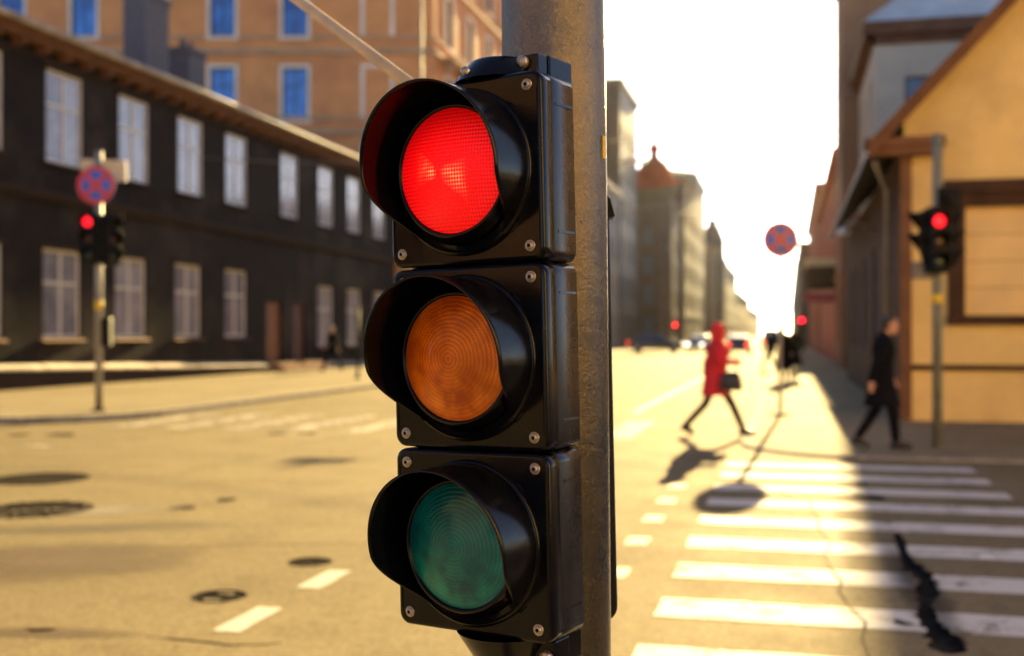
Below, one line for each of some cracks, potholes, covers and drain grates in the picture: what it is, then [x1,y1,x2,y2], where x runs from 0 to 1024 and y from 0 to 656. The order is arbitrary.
manhole cover [0,500,95,518]
manhole cover [191,590,248,603]
manhole cover [287,557,333,566]
manhole cover [0,473,91,485]
crack [780,492,870,656]
